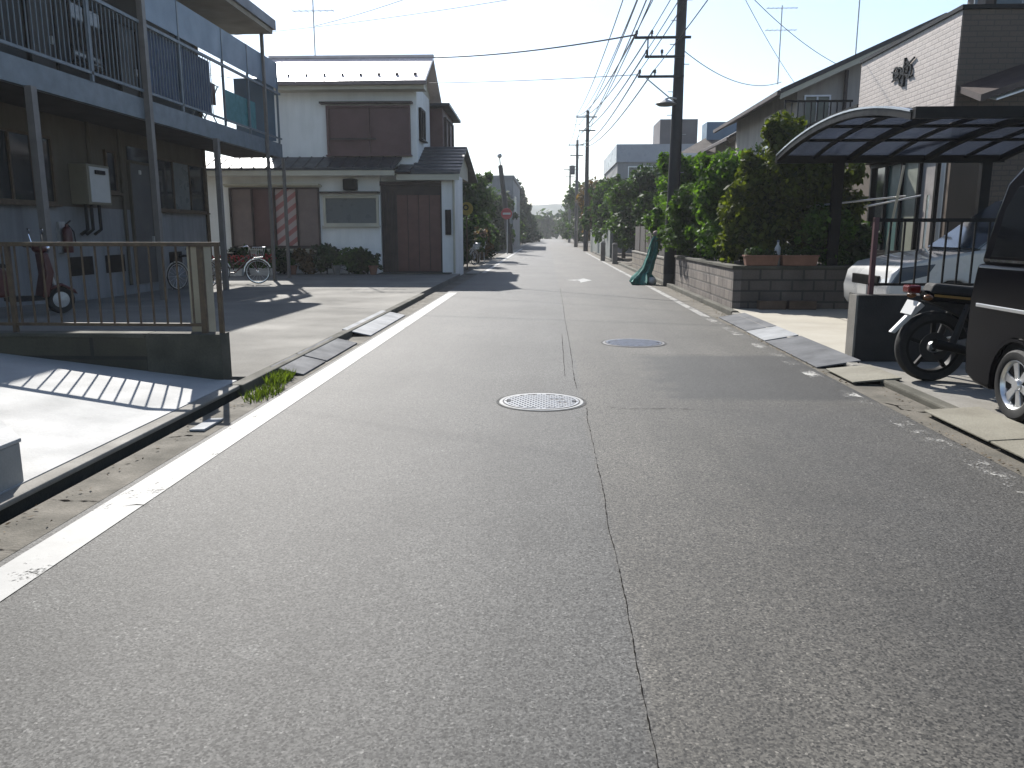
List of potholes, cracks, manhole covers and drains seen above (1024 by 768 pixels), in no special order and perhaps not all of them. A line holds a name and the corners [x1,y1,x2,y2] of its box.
manhole cover [496,393,587,411]
manhole cover [601,338,667,347]
crack [586,408,659,768]
